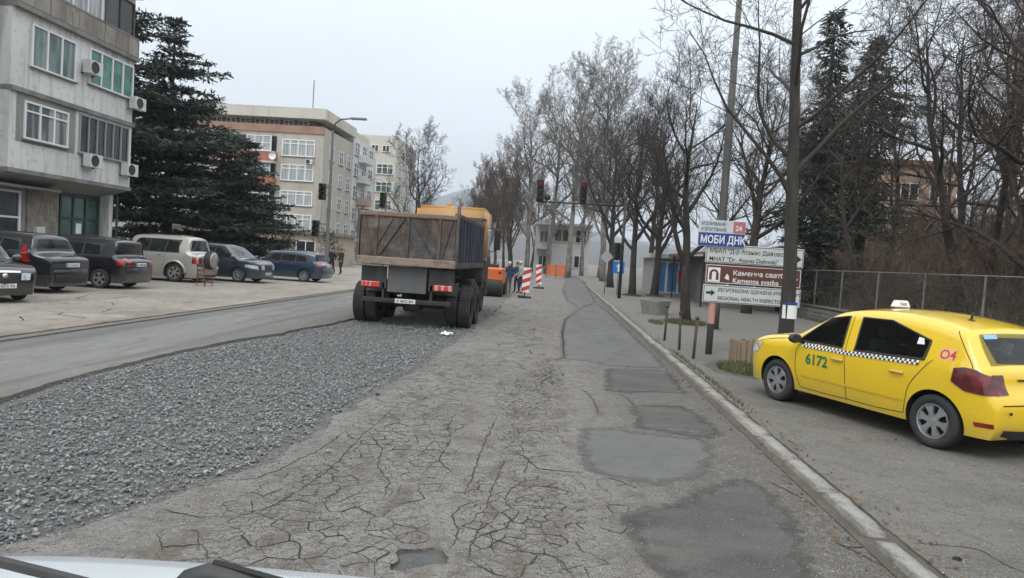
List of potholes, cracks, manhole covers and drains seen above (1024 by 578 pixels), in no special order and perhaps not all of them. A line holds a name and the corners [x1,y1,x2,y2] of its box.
crack [923,543,1021,571]
crack [356,316,655,578]
crack [156,387,468,575]
pothole [390,548,449,571]
